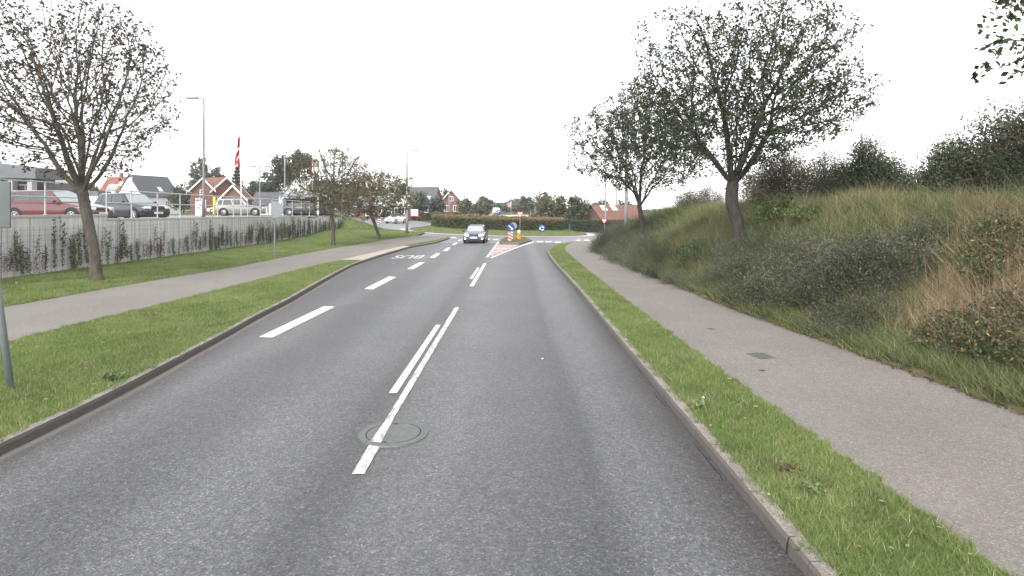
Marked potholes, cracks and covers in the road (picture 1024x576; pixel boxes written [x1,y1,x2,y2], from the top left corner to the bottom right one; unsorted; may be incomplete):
manhole cover [358,420,429,448]
